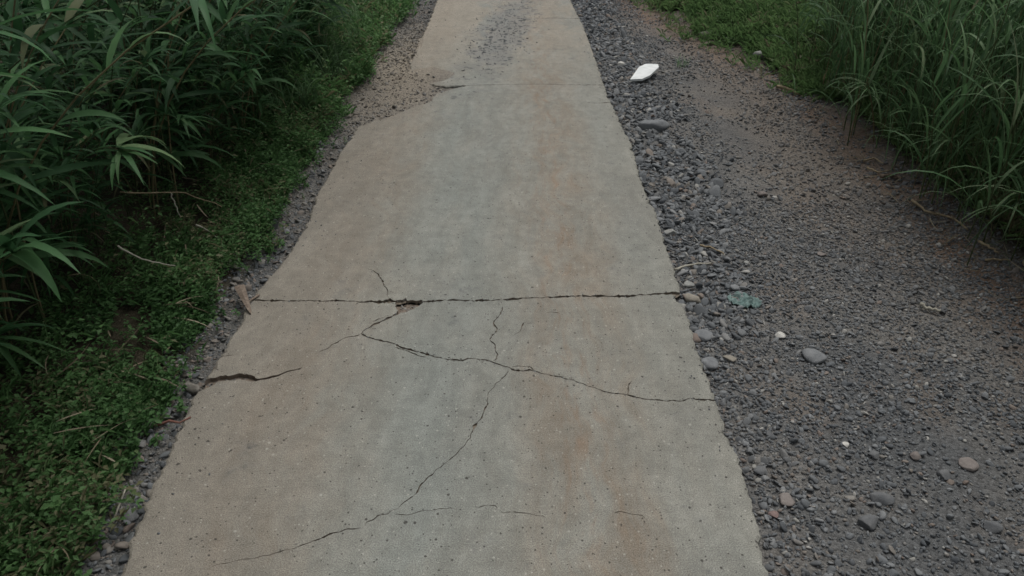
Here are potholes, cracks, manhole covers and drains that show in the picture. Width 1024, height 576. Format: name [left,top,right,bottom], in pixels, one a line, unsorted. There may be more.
crack [214,269,715,566]
